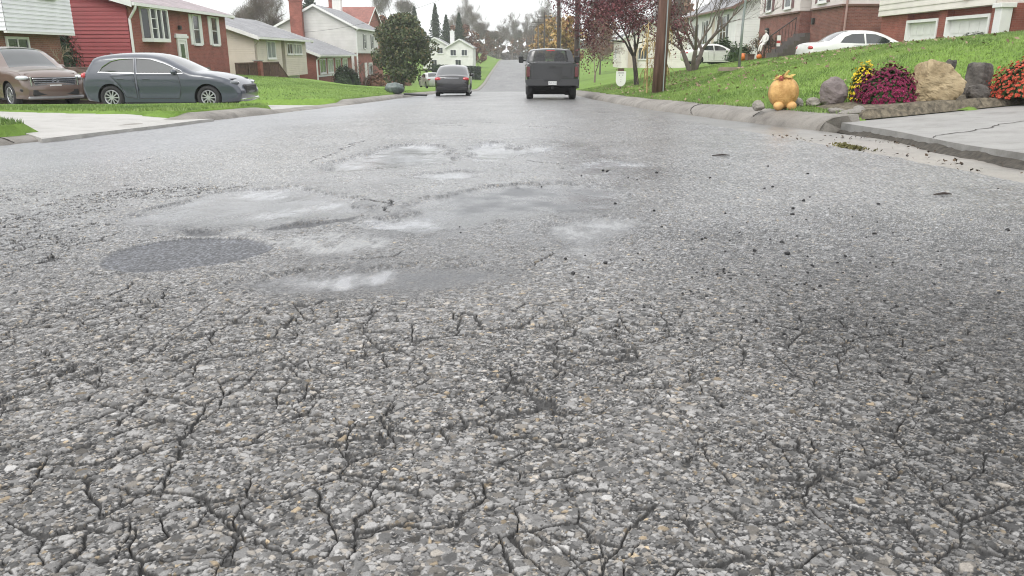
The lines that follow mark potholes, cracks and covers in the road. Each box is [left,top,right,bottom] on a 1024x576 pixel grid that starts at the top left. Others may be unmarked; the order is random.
pothole [305,142,466,172]
crack [0,237,1024,576]
pothole [215,258,512,296]
pothole [340,179,637,237]
pothole [105,185,391,229]
pothole [393,169,488,180]
pothole [458,140,558,161]
